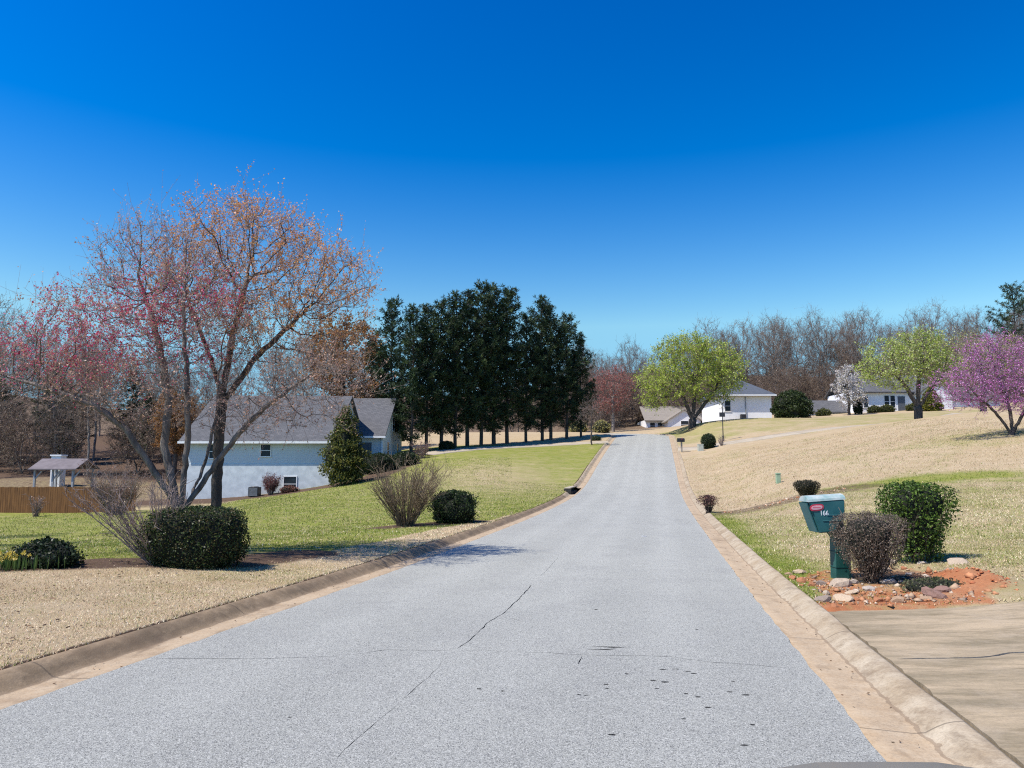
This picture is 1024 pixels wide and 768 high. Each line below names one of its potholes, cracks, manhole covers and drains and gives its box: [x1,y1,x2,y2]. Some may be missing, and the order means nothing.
crack [166,561,783,668]
